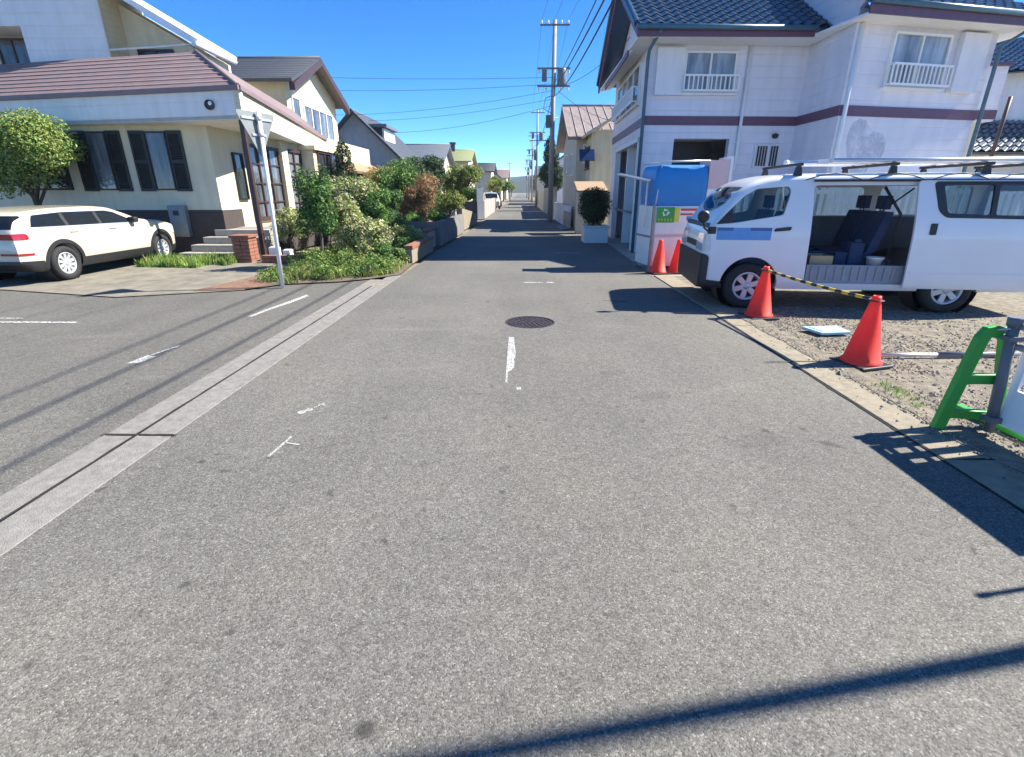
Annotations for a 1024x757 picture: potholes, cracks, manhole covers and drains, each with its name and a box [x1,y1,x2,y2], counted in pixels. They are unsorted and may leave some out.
manhole cover [505,316,555,328]
